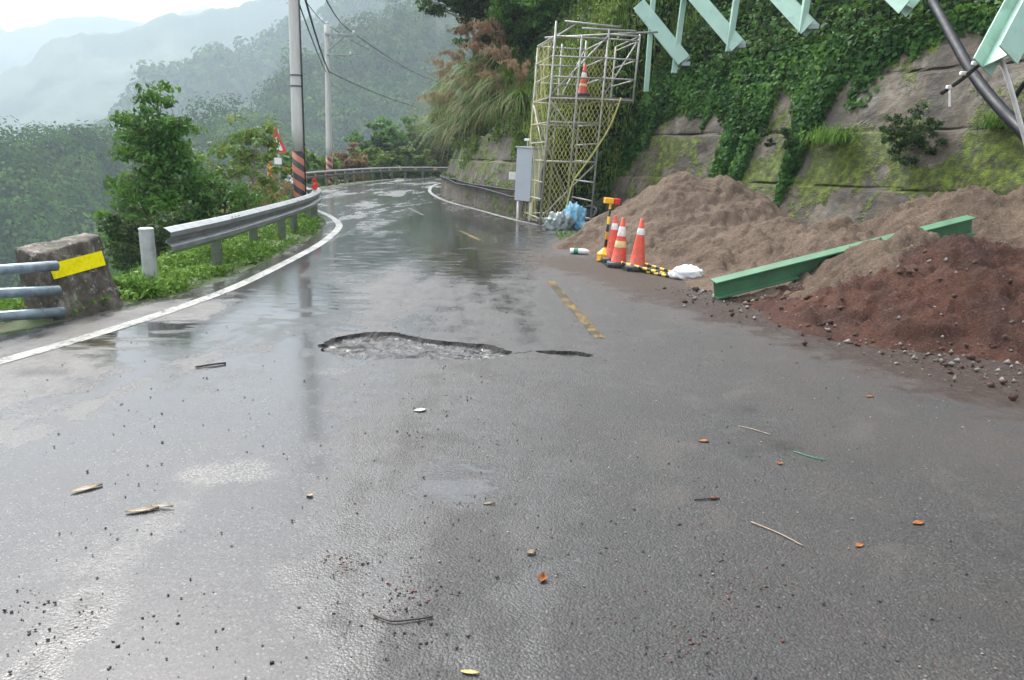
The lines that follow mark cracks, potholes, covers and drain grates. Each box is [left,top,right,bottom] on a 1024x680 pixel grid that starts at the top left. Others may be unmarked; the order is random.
pothole [318,332,512,361]
